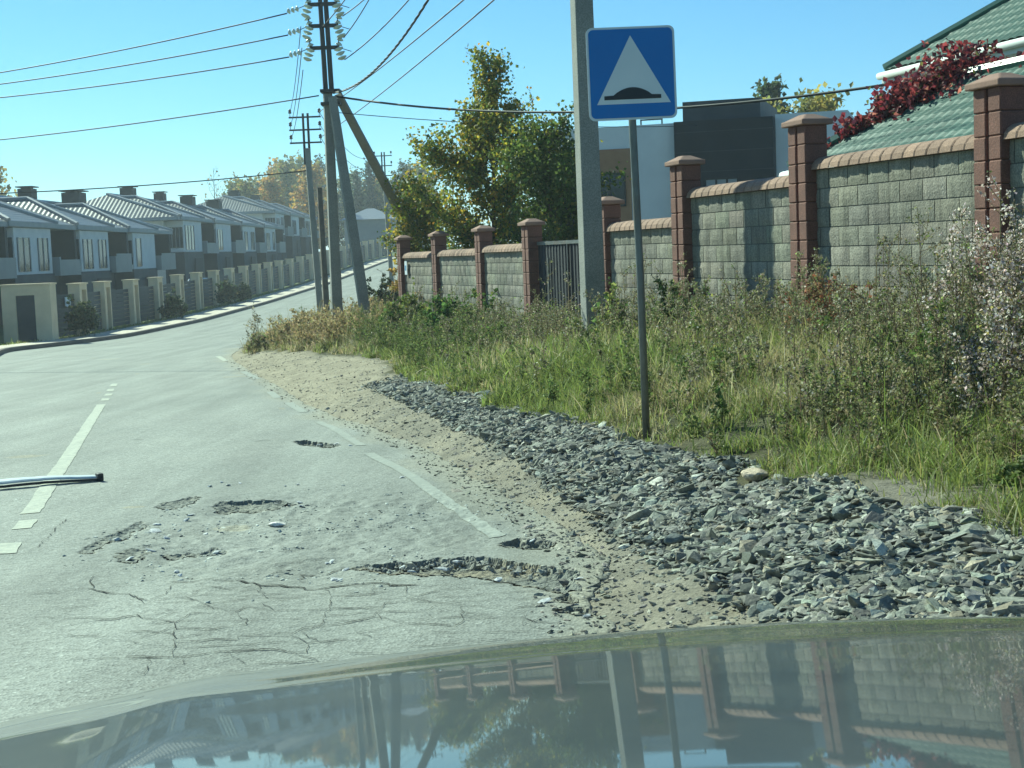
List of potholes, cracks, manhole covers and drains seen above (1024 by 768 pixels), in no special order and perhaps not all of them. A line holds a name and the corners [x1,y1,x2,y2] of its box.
pothole [163,547,226,560]
pothole [78,521,146,554]
crack [22,568,592,675]
pothole [498,537,555,550]
pothole [349,556,582,594]
pothole [293,440,339,448]
pothole [213,499,295,514]
pothole [154,496,201,509]
pothole [114,548,152,563]
